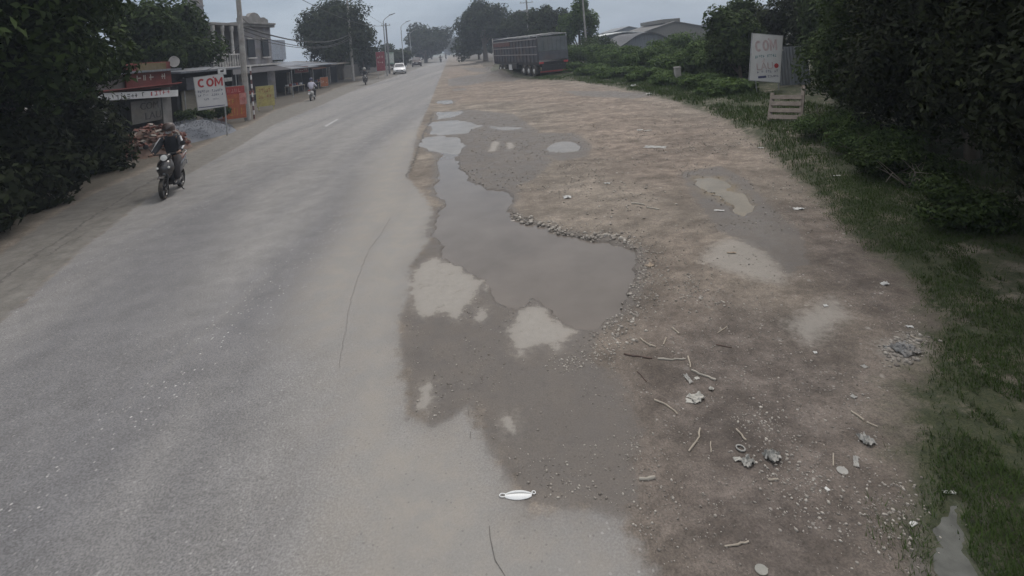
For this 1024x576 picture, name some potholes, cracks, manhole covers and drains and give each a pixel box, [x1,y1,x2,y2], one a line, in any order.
pothole [690,176,762,217]
pothole [415,134,469,156]
pothole [544,140,583,153]
pothole [434,111,464,120]
pothole [429,153,643,332]
pothole [426,119,483,135]
